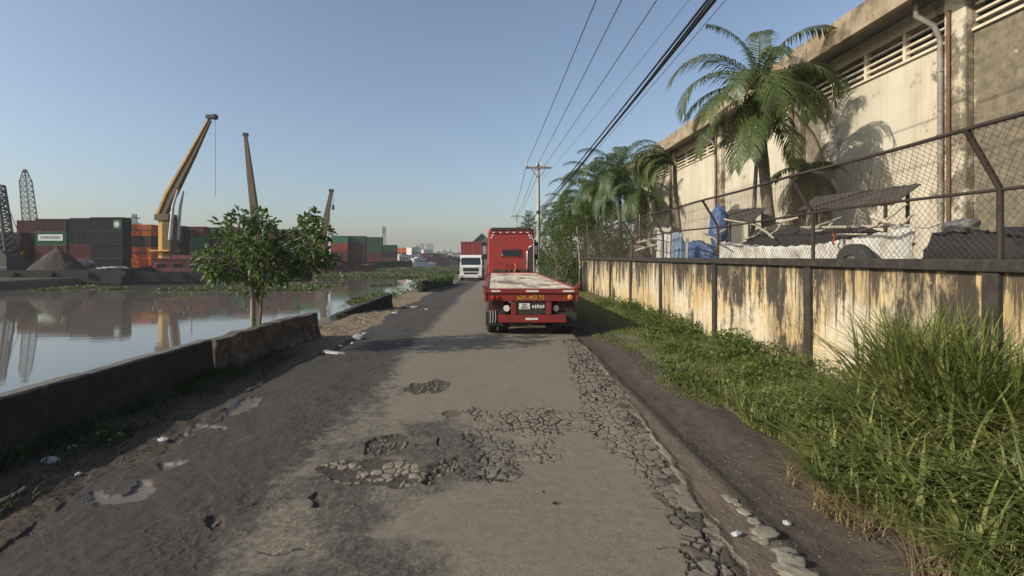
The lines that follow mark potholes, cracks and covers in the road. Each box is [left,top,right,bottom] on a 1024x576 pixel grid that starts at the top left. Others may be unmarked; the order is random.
pothole [88,478,159,506]
pothole [404,378,452,395]
pothole [157,458,191,471]
crack [414,338,750,576]
pothole [205,512,227,531]
pothole [308,490,331,508]
pothole [178,423,231,438]
pothole [315,457,428,489]
pothole [364,433,414,458]
pothole [224,396,264,416]
